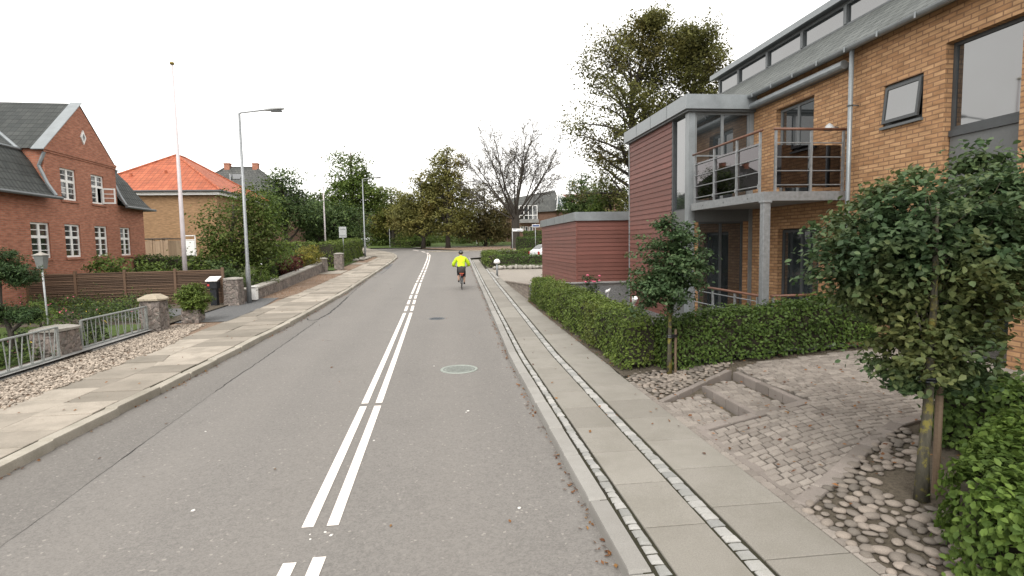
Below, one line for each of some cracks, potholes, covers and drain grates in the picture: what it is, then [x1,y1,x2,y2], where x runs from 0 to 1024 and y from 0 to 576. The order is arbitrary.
manhole cover [440,365,478,374]
